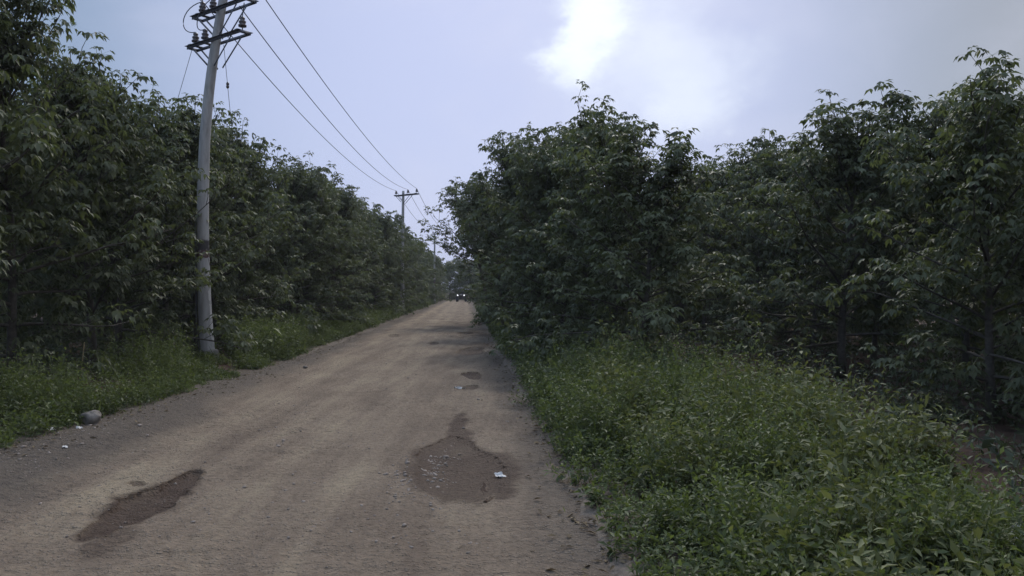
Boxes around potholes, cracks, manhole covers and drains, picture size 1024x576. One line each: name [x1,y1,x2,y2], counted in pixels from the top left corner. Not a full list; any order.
pothole [460,371,482,380]
pothole [78,468,204,541]
pothole [405,435,517,505]
